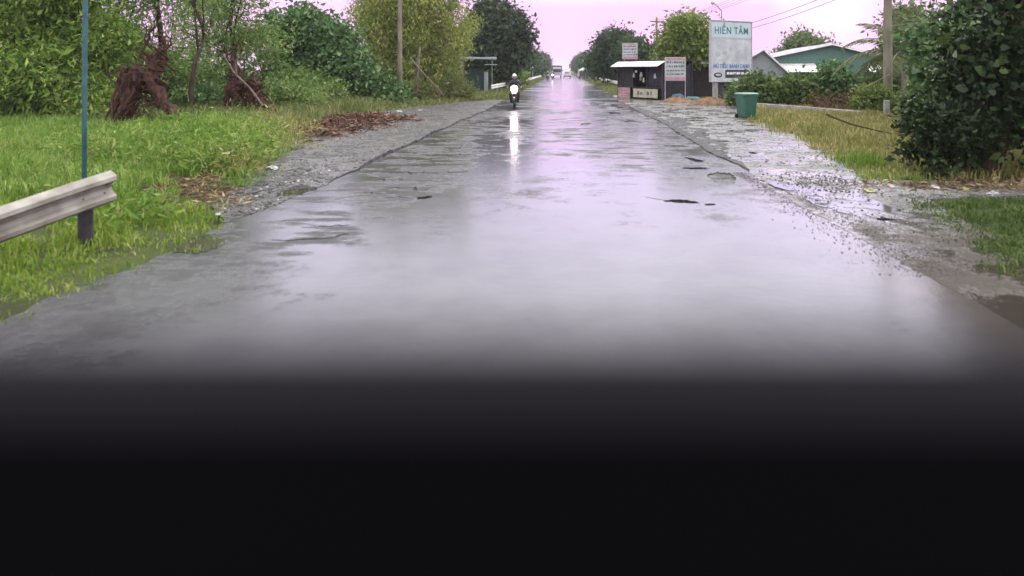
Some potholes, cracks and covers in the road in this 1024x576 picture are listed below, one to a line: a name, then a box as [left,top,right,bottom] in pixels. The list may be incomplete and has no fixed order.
pothole [707,172,736,184]
